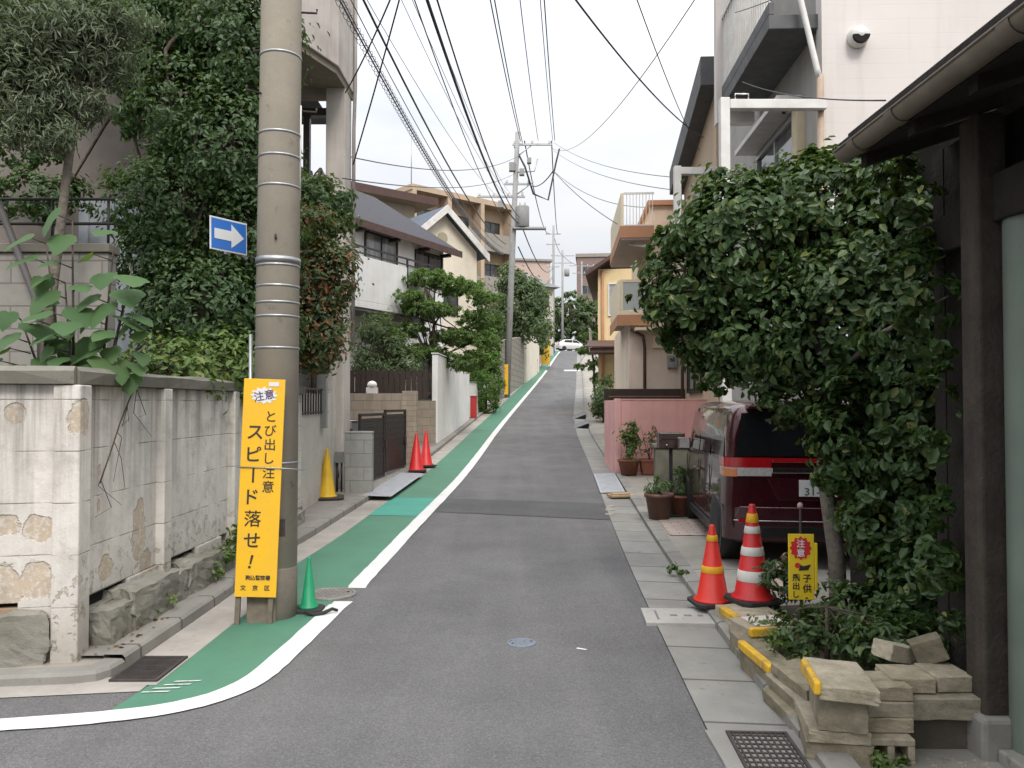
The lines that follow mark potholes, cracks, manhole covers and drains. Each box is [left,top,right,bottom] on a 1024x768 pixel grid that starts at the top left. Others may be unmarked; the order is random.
drain grate [725,730,812,768]
manhole cover [315,587,357,601]
manhole cover [507,638,536,648]
drain grate [109,656,188,686]
